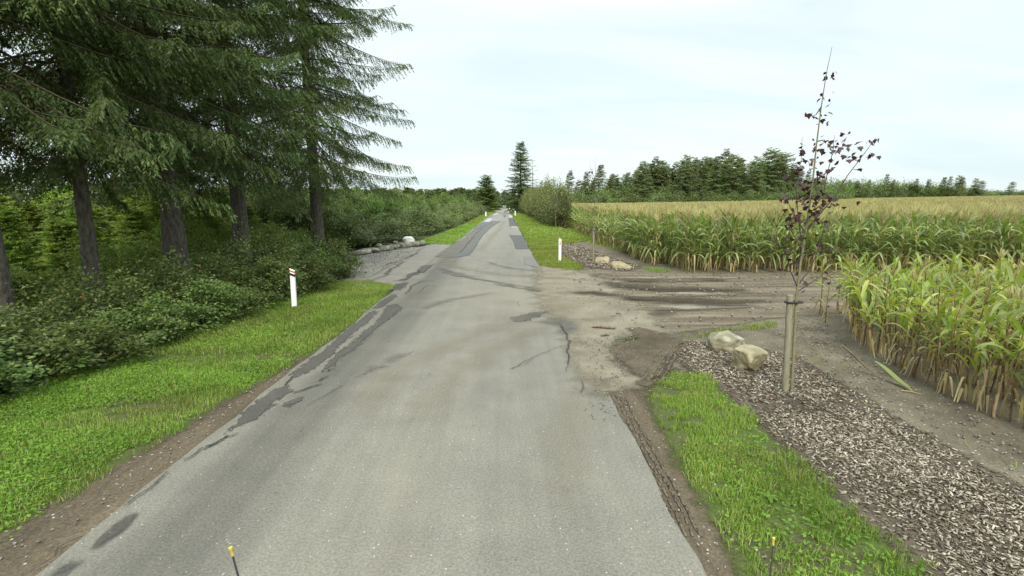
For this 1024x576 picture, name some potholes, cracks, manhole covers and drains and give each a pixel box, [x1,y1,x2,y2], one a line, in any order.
crack [555,322,584,392]
